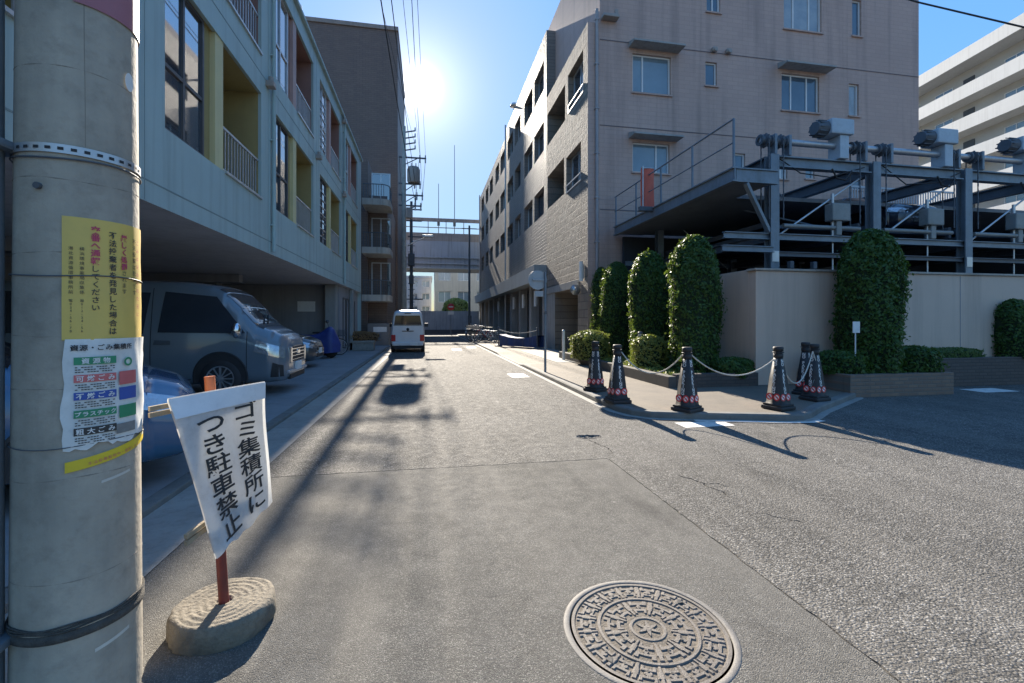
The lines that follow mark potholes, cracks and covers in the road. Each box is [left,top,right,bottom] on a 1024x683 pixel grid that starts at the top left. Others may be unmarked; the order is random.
manhole cover [563,580,742,683]
